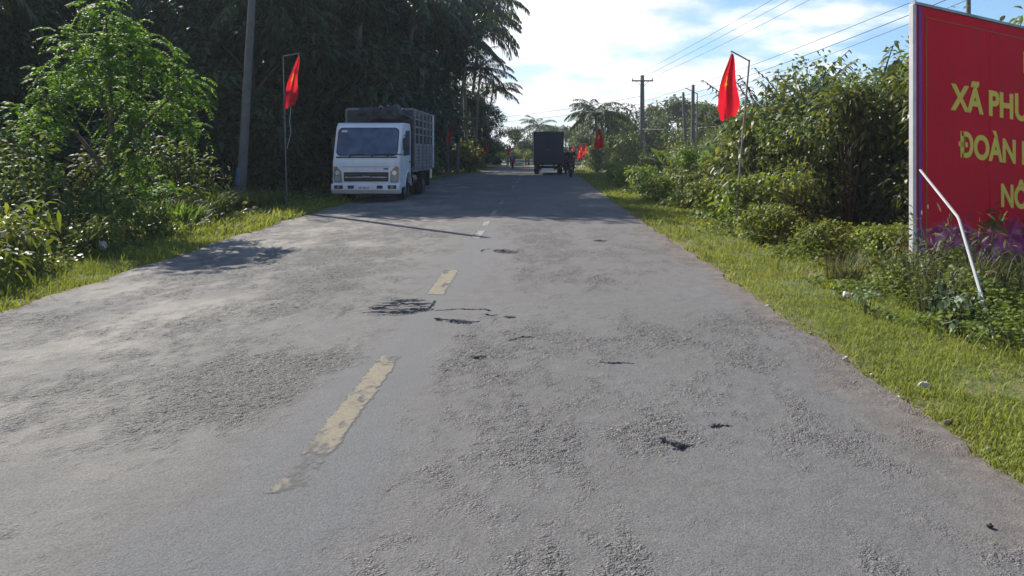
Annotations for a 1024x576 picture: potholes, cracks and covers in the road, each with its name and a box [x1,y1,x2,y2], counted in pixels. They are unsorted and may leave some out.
pothole [649,434,704,455]
crack [433,308,503,317]
pothole [356,297,441,317]
pothole [464,353,492,362]
